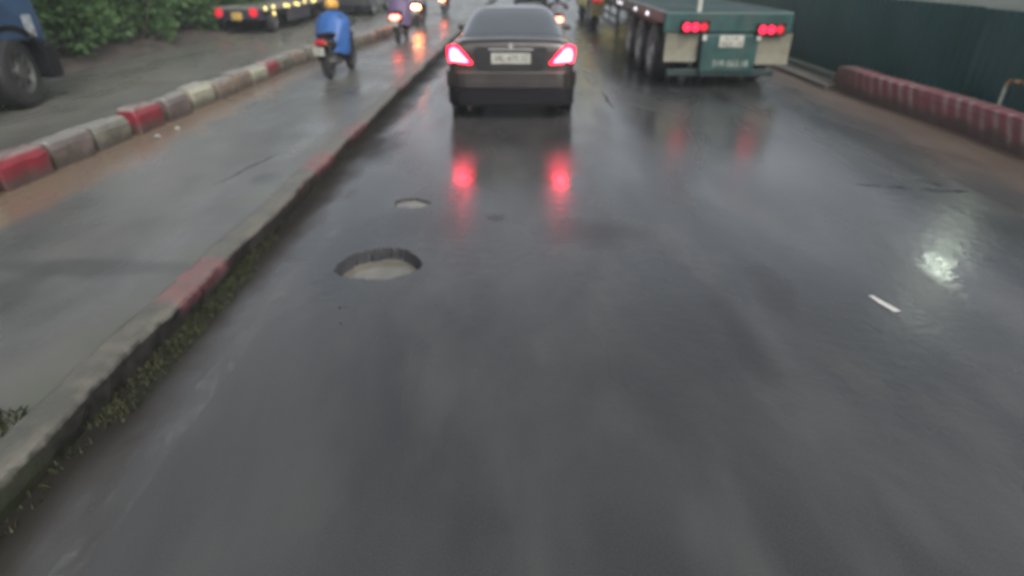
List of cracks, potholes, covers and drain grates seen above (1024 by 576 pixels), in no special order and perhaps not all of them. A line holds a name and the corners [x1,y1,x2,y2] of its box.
pothole [395,198,431,208]
crack [218,153,280,183]
crack [857,181,970,193]
pothole [334,248,423,280]
